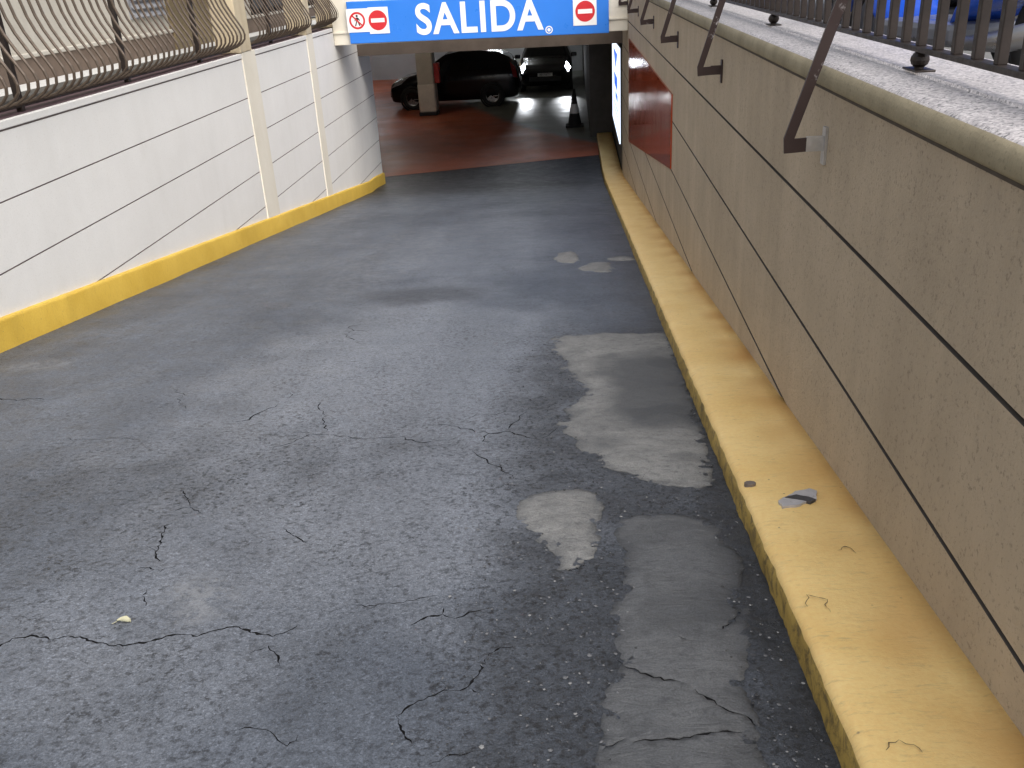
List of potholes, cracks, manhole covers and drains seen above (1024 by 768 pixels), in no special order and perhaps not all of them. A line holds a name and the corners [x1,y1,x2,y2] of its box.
crack [611,660,766,746]
crack [0,626,294,666]
crack [146,491,199,571]
crack [398,647,510,743]
crack [362,597,481,625]
crack [449,406,556,479]
crack [276,402,439,447]
